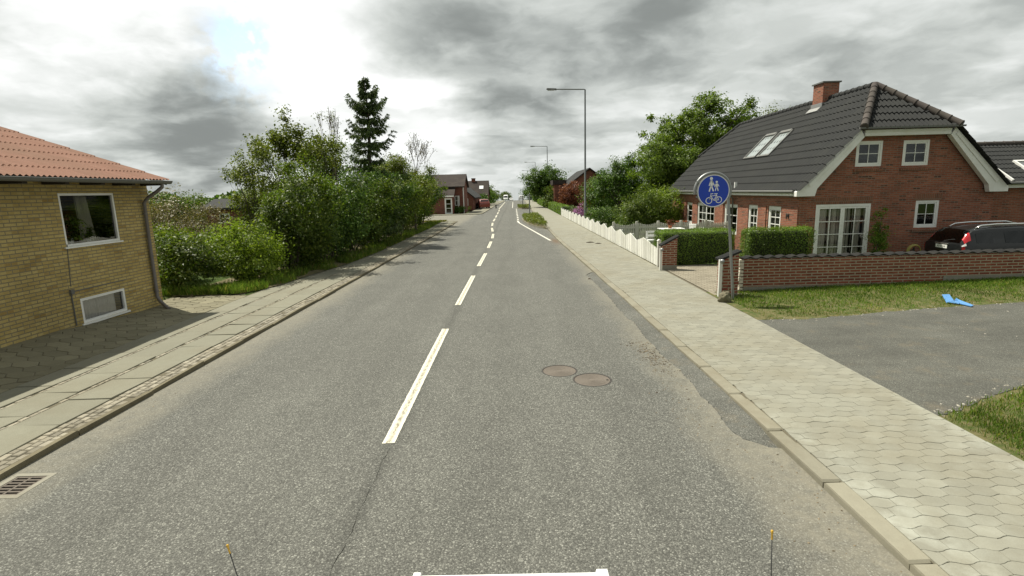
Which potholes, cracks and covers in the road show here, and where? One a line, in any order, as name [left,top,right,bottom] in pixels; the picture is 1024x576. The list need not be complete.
crack [330,448,390,574]
manhole cover [573,373,612,387]
manhole cover [542,365,577,377]
drain grate [0,473,57,499]
